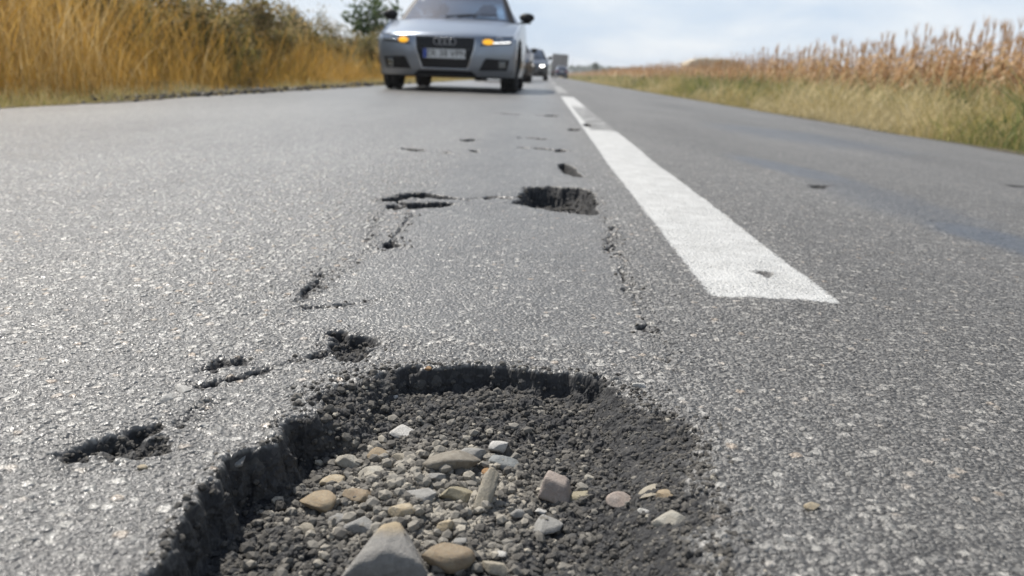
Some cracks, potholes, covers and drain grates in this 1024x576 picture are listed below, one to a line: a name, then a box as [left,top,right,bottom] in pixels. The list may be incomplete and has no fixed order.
pothole [50,417,193,465]
crack [293,211,415,310]
pothole [510,185,601,216]
pothole [557,163,587,178]
pothole [324,329,383,363]
crack [513,136,556,152]
crack [598,216,680,372]
crack [181,349,332,422]
pothole [138,363,734,576]
